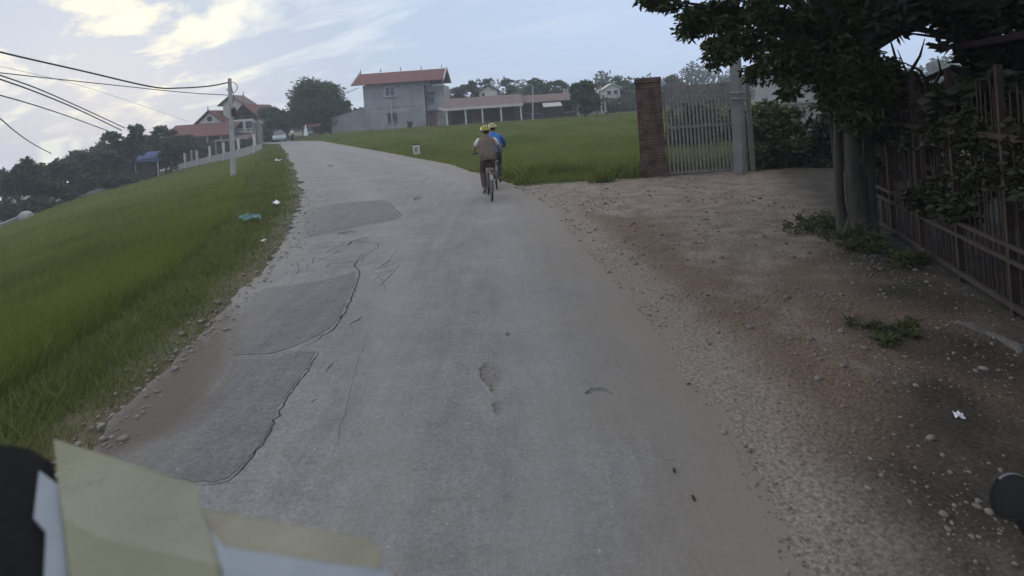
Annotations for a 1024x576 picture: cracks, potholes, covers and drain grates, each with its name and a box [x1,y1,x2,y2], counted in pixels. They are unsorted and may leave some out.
crack [208,201,402,485]
pothole [491,401,503,415]
pothole [478,361,503,394]
pothole [584,387,614,396]
